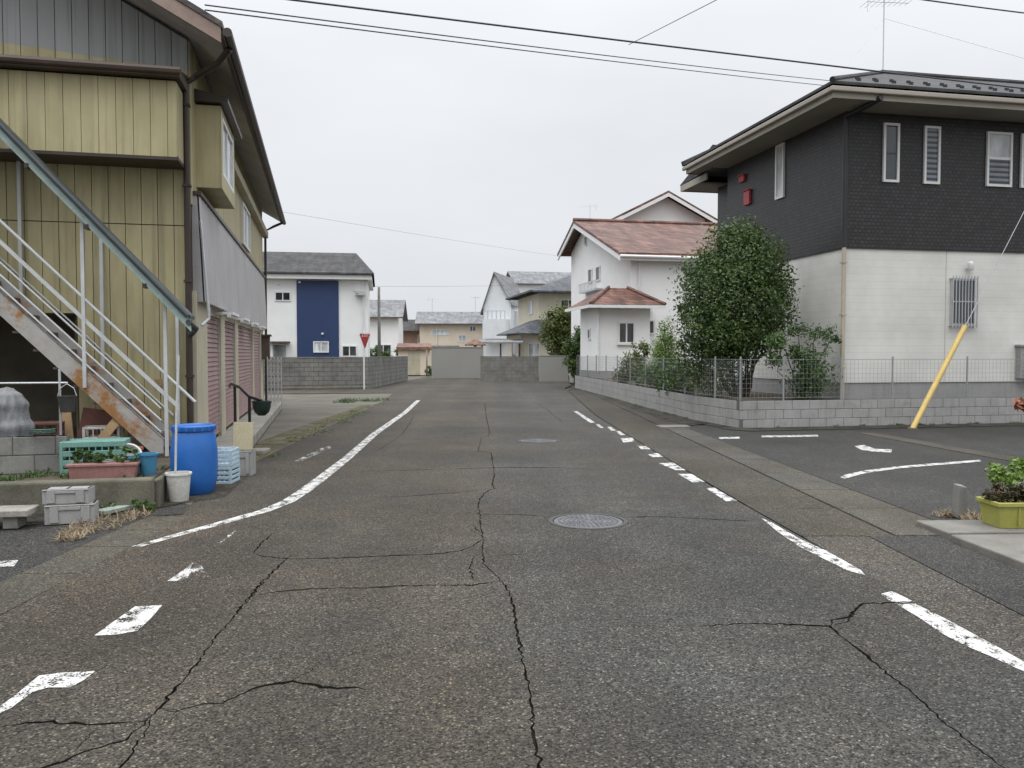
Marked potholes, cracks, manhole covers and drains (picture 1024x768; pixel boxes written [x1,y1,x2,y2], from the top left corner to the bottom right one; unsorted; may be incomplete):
crack [0,406,578,768]
crack [701,602,1005,768]
manhole cover [548,513,628,529]
